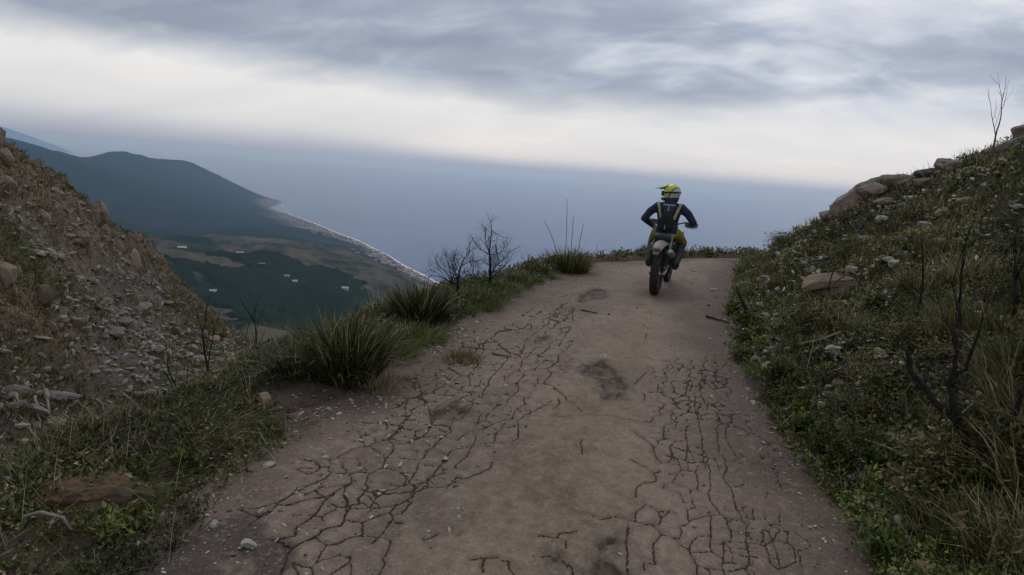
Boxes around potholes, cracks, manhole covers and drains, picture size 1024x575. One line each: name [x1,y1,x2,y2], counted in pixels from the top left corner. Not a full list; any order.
crack [237,295,582,575]
pothole [579,289,607,303]
crack [583,358,819,575]
pothole [581,361,627,399]
